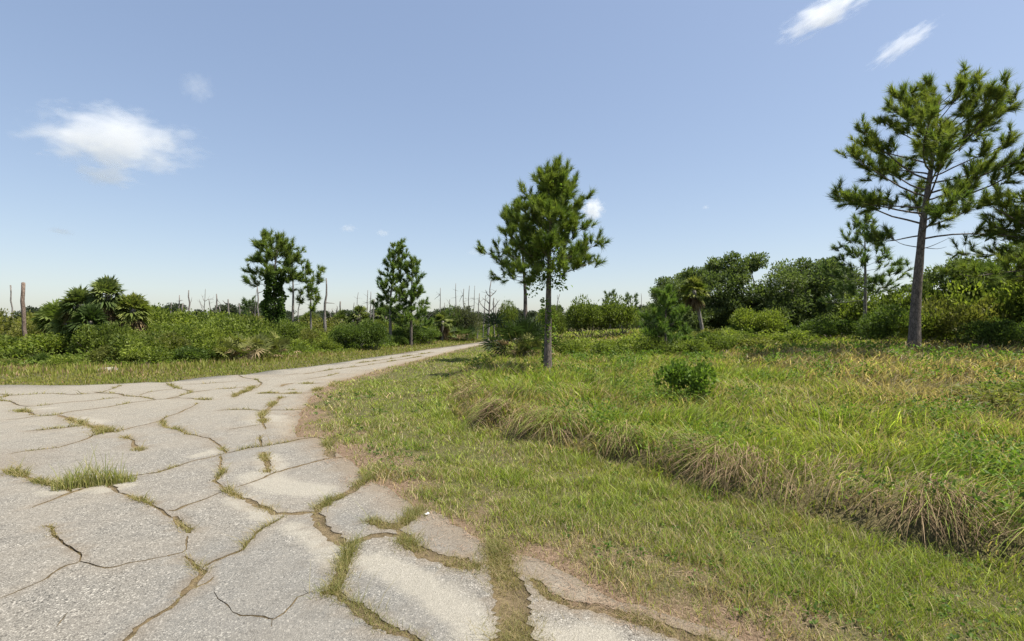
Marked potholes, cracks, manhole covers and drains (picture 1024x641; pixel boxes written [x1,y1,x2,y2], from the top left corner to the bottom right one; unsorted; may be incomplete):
crack [281,352,433,394]
crack [1,375,262,454]
crack [1,398,714,641]
